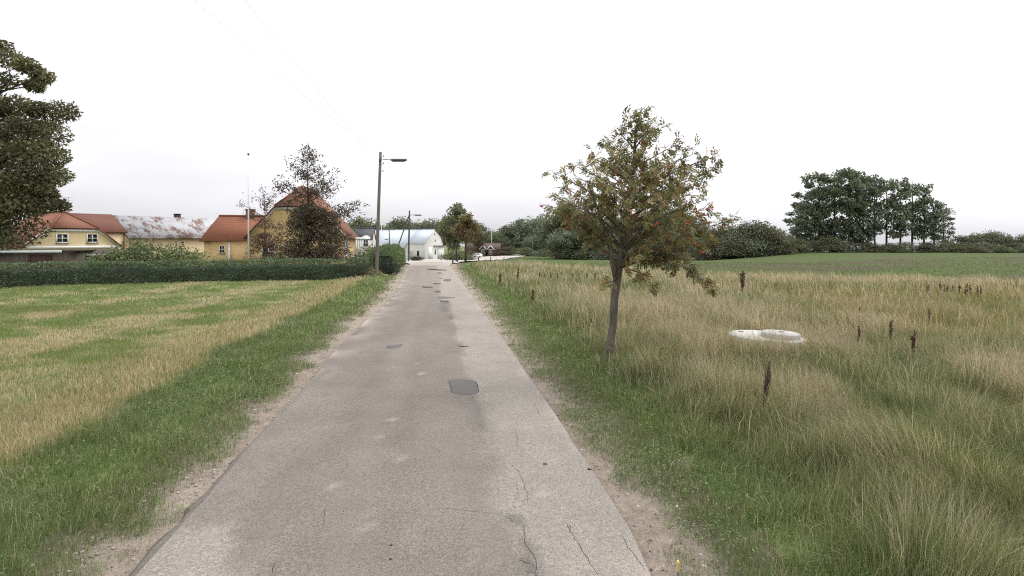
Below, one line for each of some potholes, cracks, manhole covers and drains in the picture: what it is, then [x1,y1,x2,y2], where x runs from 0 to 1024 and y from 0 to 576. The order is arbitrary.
crack [441,428,537,575]
